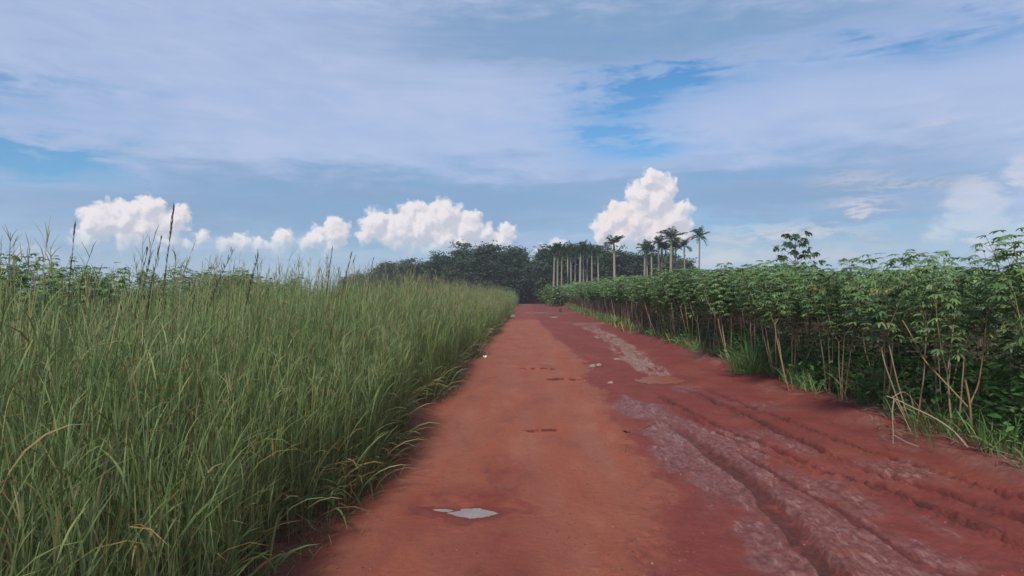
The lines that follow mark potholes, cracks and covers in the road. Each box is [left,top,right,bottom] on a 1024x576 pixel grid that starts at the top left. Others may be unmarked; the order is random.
pothole [388,487,556,533]
